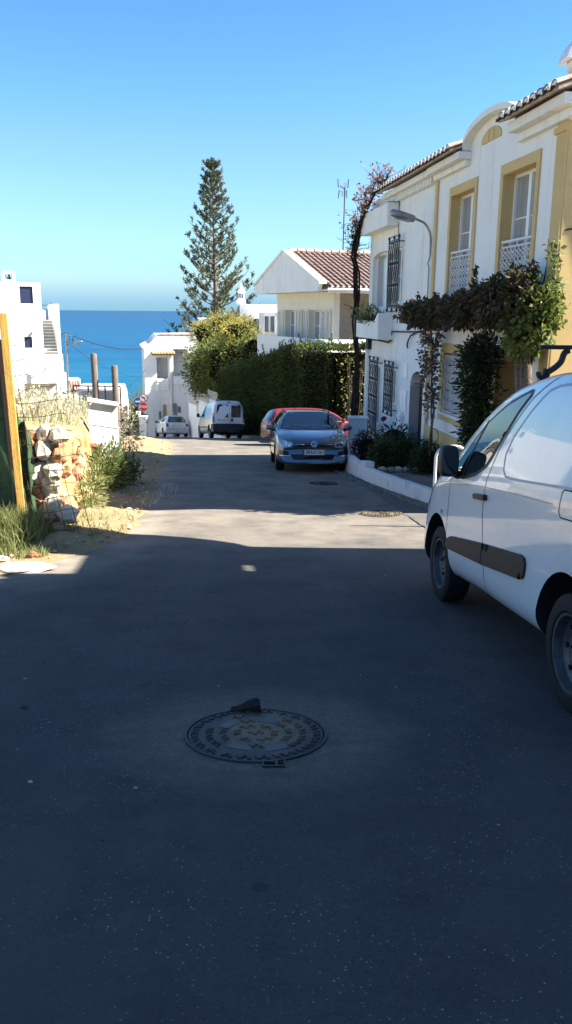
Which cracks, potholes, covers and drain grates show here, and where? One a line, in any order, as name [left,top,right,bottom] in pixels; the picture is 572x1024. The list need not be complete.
manhole cover [184,708,327,768]
